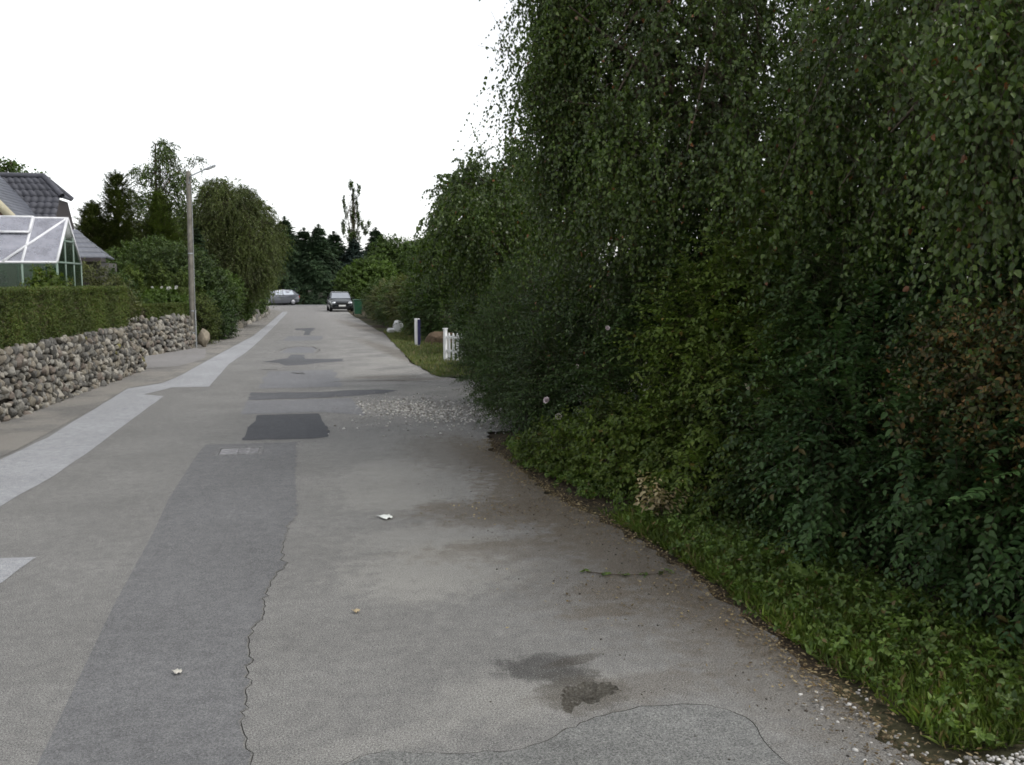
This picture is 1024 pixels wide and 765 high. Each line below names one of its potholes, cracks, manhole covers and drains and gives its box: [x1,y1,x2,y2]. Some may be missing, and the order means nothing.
manhole cover [213,446,265,456]
crack [240,526,289,765]
crack [343,704,788,765]
